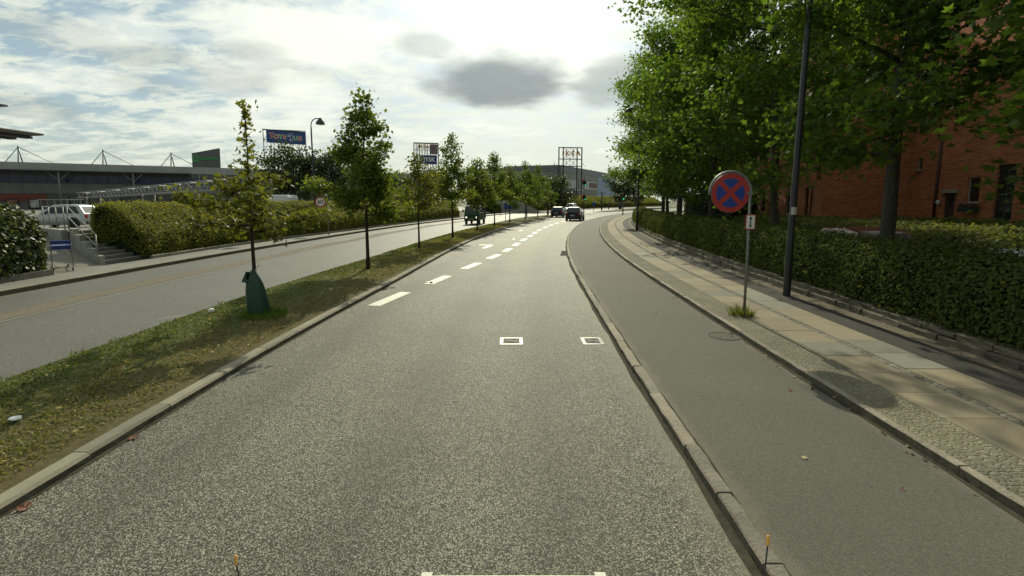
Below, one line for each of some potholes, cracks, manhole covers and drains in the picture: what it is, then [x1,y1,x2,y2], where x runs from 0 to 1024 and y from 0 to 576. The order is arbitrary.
manhole cover [708,332,741,341]
manhole cover [580,337,605,345]
manhole cover [500,337,523,345]
